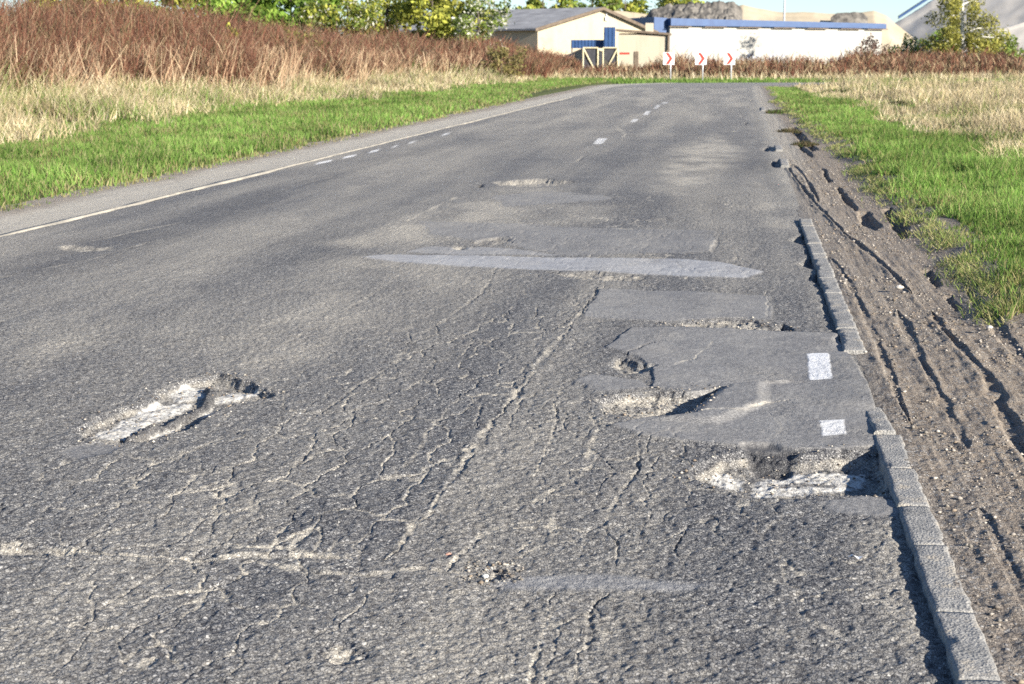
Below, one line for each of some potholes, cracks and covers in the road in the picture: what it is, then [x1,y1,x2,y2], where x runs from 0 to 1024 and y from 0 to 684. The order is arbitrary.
pothole [492,178,581,187]
pothole [74,373,275,445]
pothole [608,356,659,375]
pothole [595,389,718,418]
pothole [688,448,890,500]
pothole [481,566,508,581]
crack [0,191,911,684]
